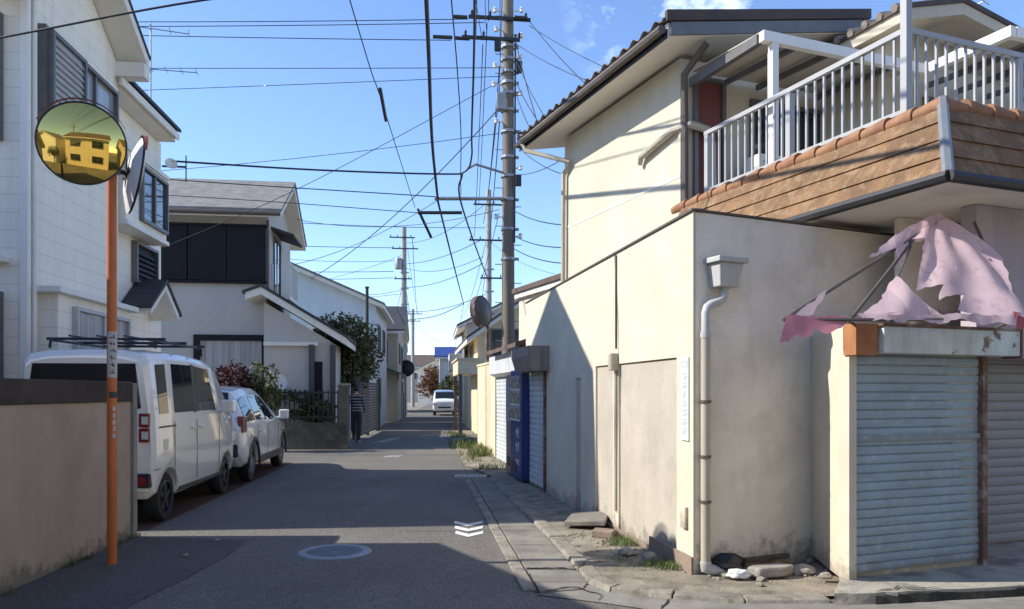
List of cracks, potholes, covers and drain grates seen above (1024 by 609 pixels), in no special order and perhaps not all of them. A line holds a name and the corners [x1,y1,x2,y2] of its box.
manhole cover [297,544,372,560]
